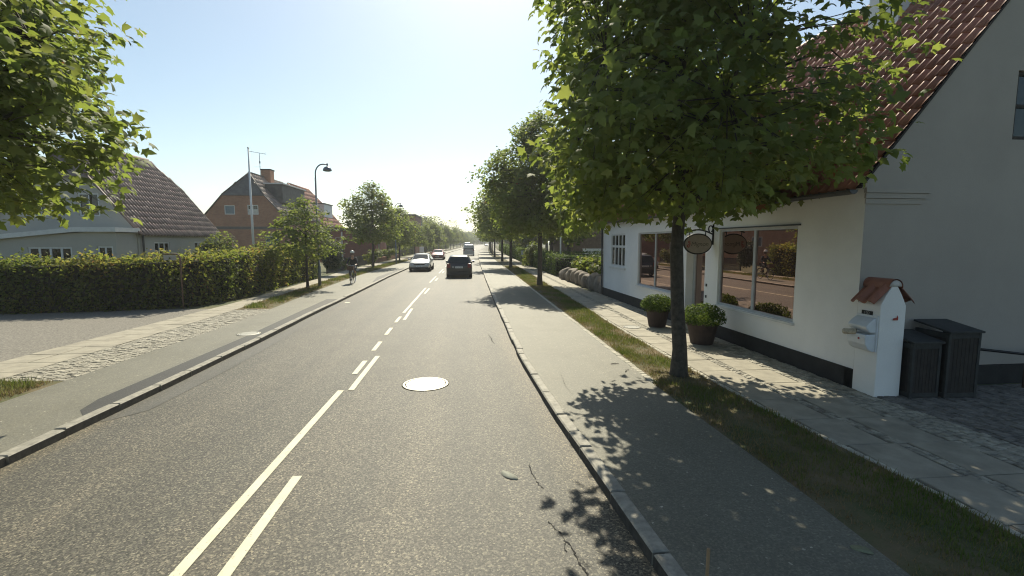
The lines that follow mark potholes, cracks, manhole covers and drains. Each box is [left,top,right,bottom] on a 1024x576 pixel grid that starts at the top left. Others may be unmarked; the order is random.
crack [548,521,589,576]
manhole cover [402,377,449,391]
